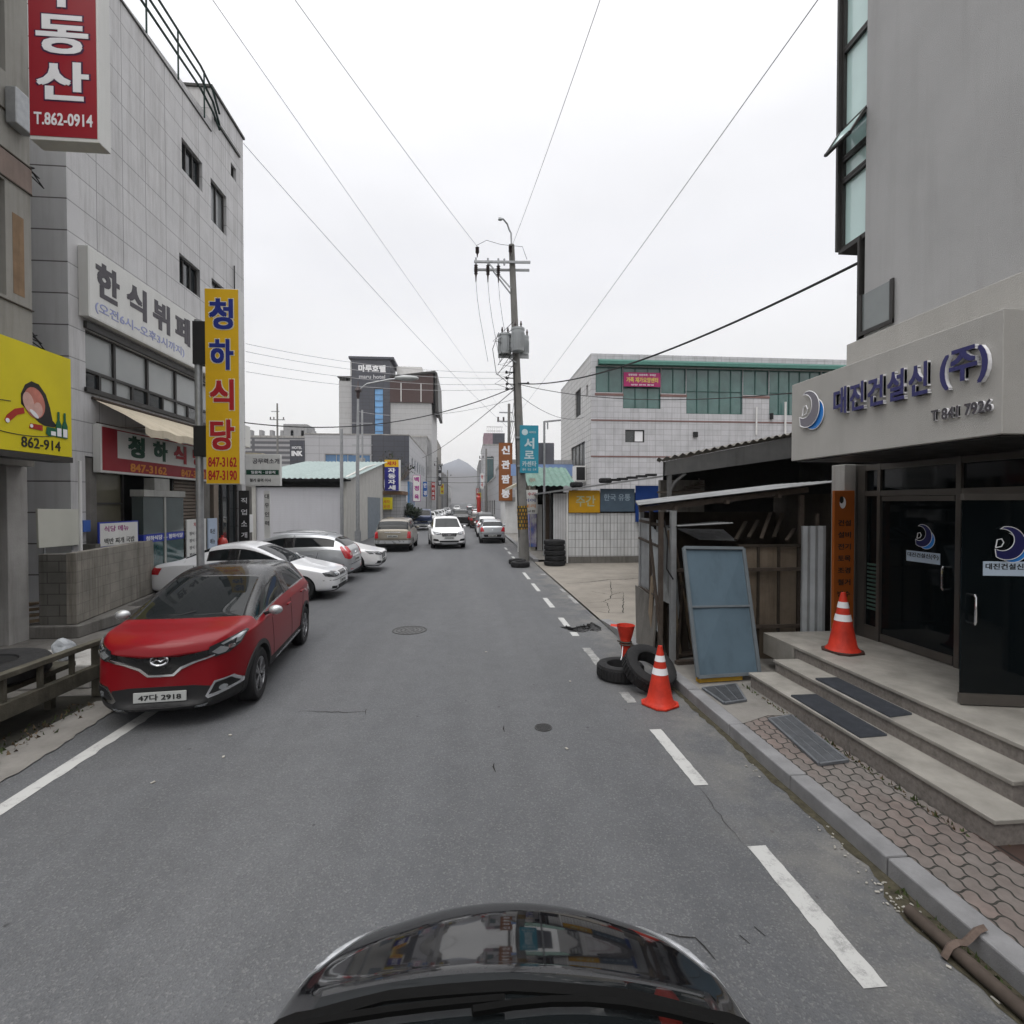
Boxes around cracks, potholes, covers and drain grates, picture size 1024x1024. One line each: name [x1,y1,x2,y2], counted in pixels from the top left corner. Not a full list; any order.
drain grate [768,714,849,766]
crack [666,933,716,960]
crack [567,578,635,613]
drain grate [702,683,747,705]
manhole cover [392,626,427,635]
pothole [561,622,601,633]
